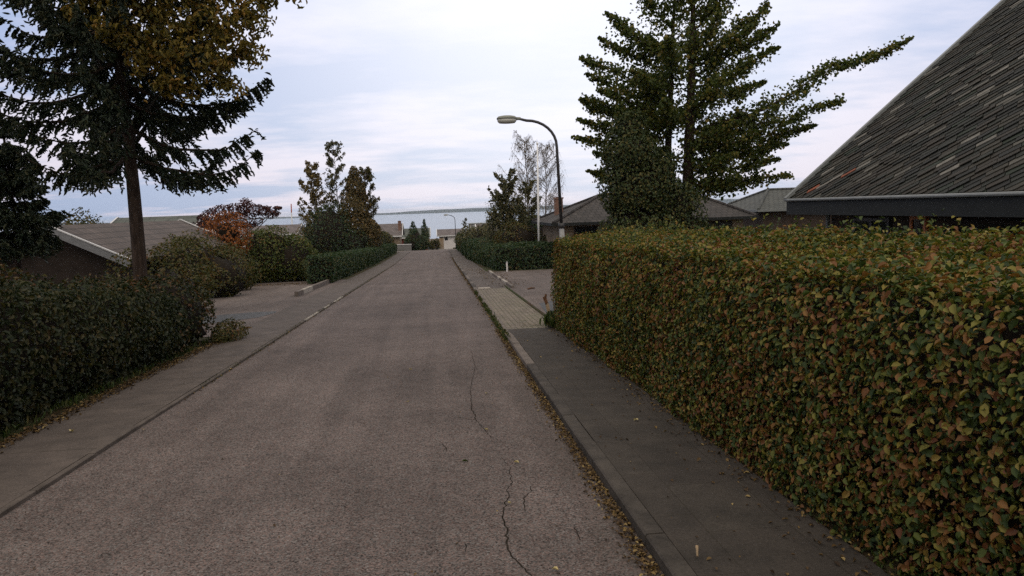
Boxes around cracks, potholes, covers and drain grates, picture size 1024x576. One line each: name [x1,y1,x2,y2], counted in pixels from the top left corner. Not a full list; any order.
crack [459,350,491,437]
crack [501,457,532,576]
